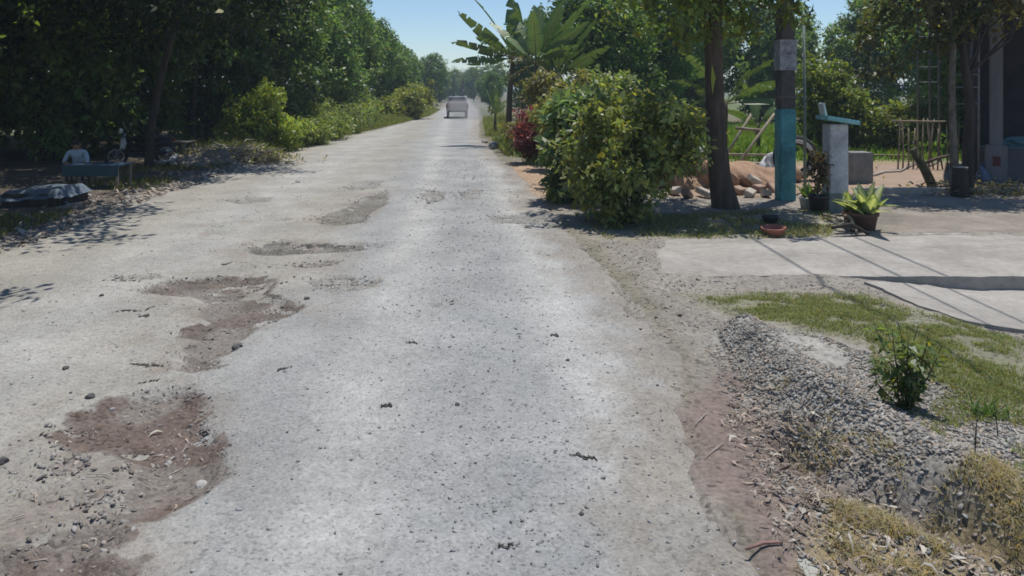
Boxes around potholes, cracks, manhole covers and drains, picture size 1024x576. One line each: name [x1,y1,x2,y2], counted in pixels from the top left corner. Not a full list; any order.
pothole [306,275,386,292]
pothole [228,196,275,205]
pothole [242,240,385,256]
pothole [419,190,447,204]
pothole [126,275,308,373]
pothole [313,190,389,226]
pothole [48,383,238,526]
